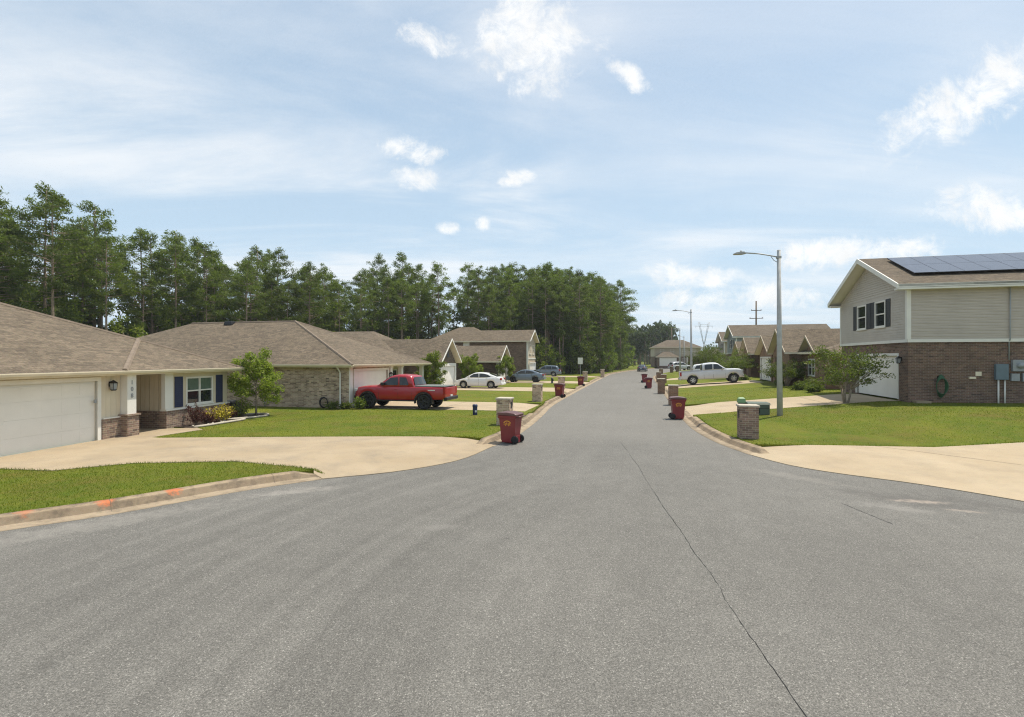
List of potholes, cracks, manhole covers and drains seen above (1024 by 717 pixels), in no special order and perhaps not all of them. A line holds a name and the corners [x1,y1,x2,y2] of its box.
crack [622,444,807,717]
